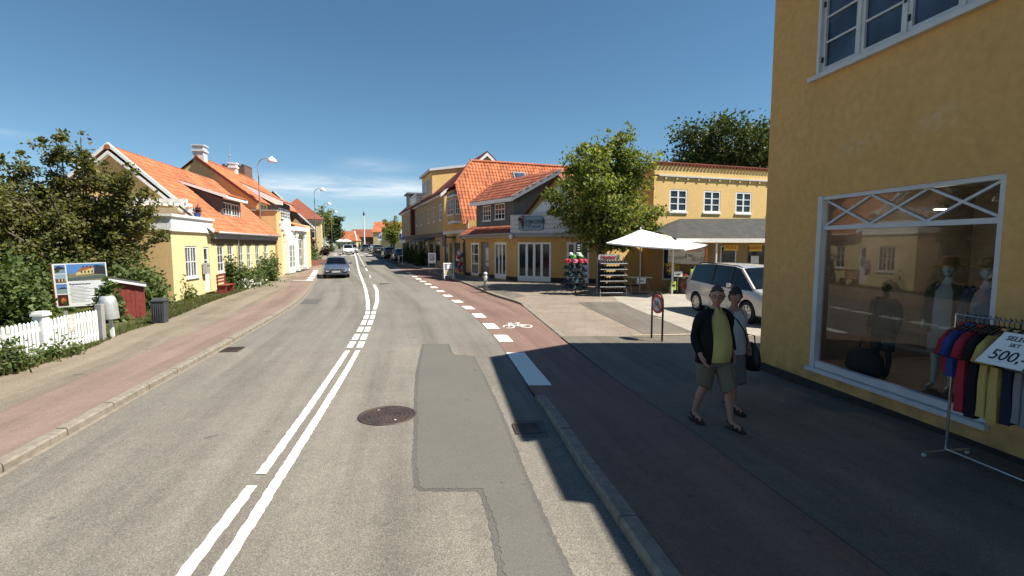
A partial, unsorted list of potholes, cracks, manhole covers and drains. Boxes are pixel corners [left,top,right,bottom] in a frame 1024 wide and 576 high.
manhole cover [358,406,416,426]
drain grate [512,422,544,435]
